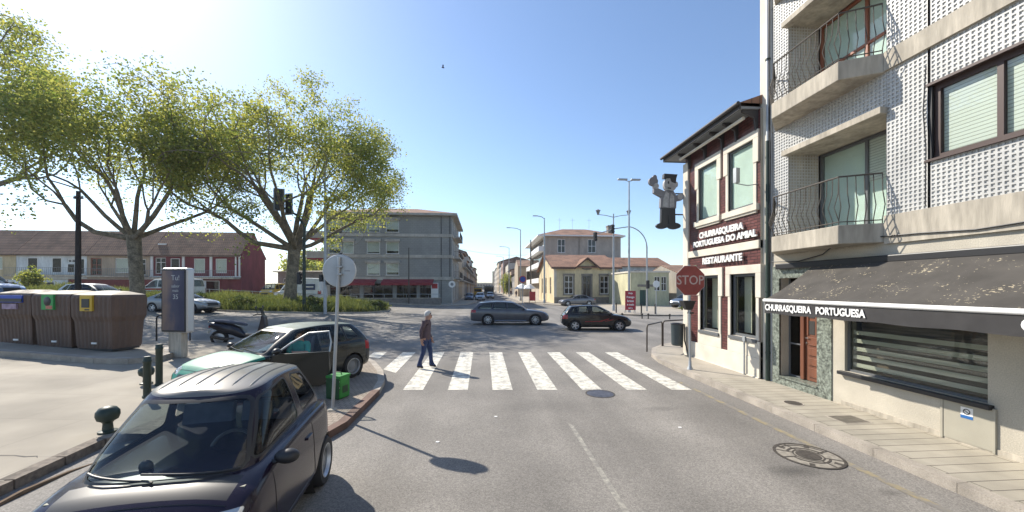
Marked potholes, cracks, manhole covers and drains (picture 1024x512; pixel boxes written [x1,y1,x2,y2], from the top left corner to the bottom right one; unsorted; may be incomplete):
manhole cover [585,390,615,398]
manhole cover [773,443,848,470]
